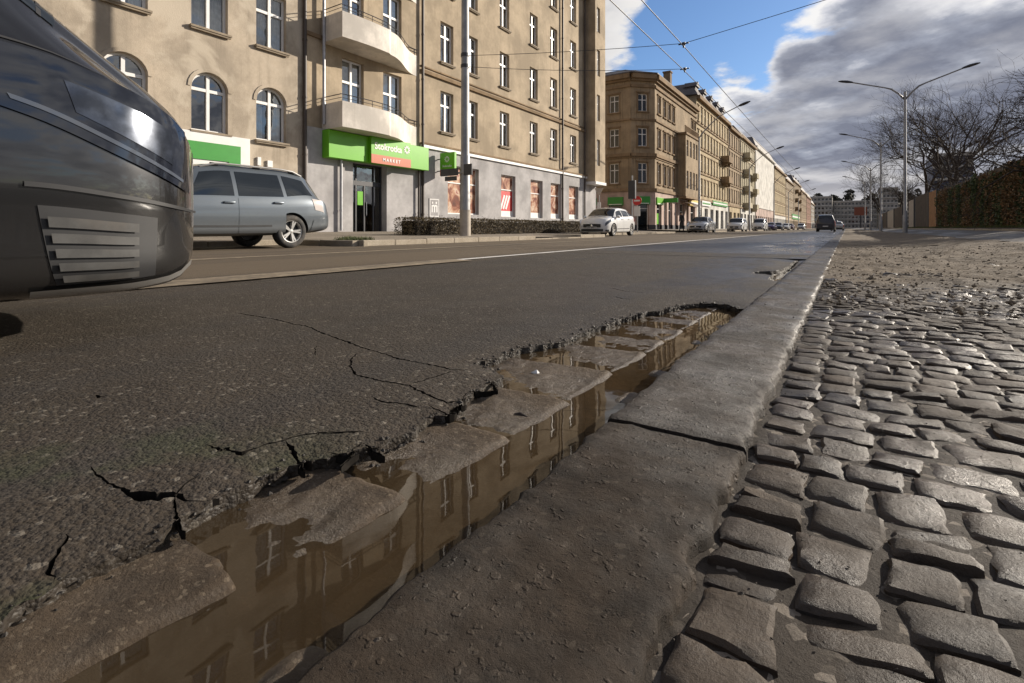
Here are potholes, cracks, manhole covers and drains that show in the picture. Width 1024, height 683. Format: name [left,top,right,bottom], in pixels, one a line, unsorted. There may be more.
crack [240,313,498,424]
pothole [753,260,800,281]
pothole [0,301,743,683]
crack [44,534,69,580]
crack [89,431,385,540]
